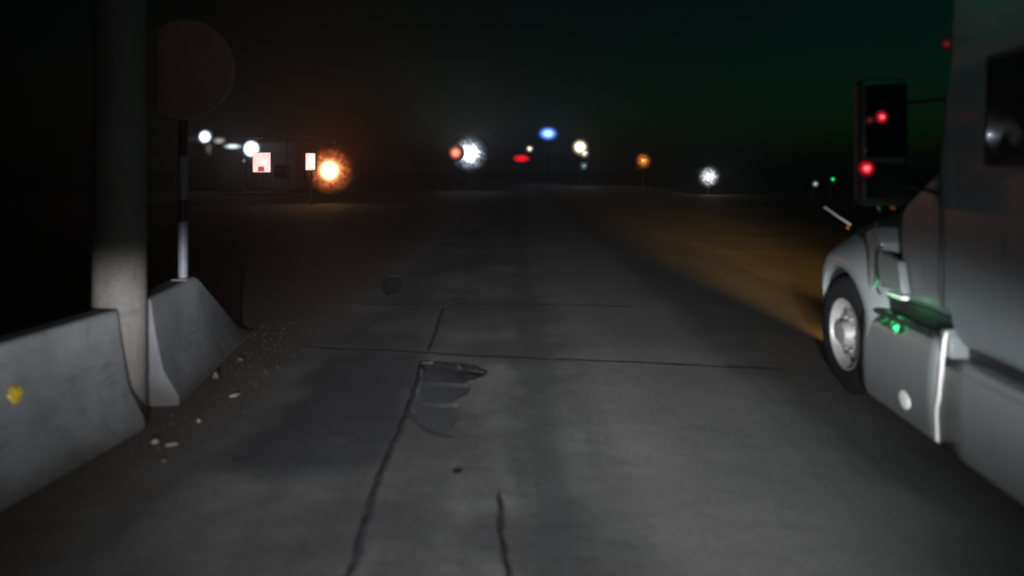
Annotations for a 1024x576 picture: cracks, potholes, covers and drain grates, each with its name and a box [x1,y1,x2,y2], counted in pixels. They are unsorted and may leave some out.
pothole [381,275,402,296]
pothole [411,360,487,438]
crack [297,302,807,576]
